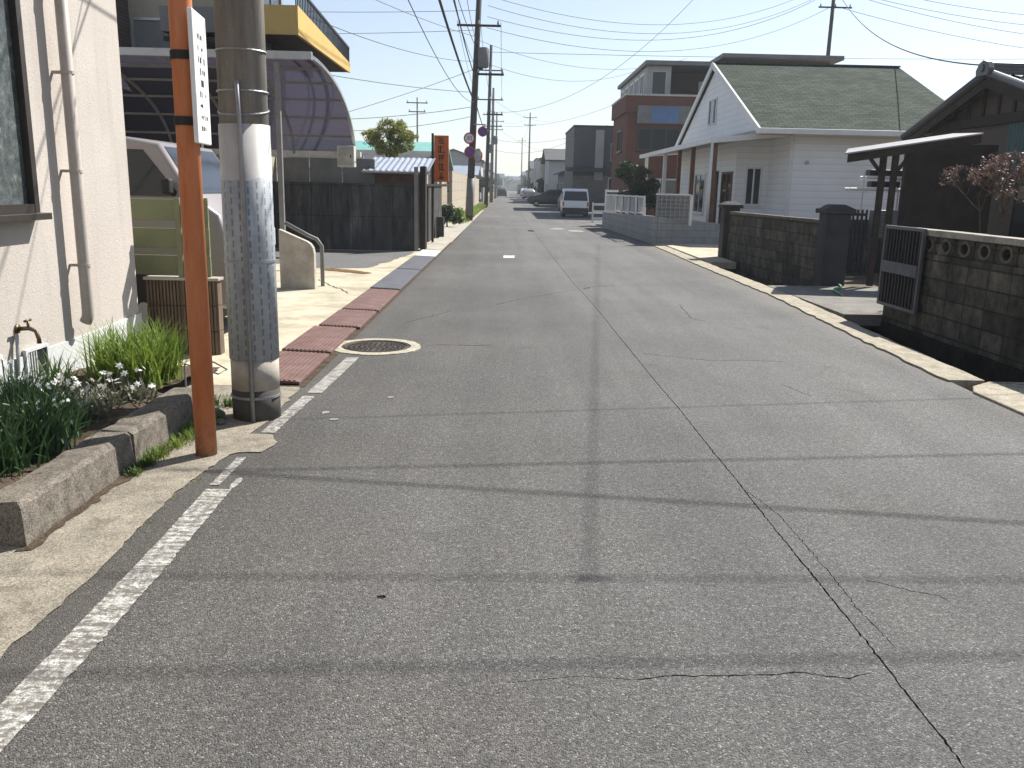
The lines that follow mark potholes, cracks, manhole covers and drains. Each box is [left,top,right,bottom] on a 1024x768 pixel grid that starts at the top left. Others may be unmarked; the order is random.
crack [496,209,965,768]
manhole cover [334,338,421,356]
